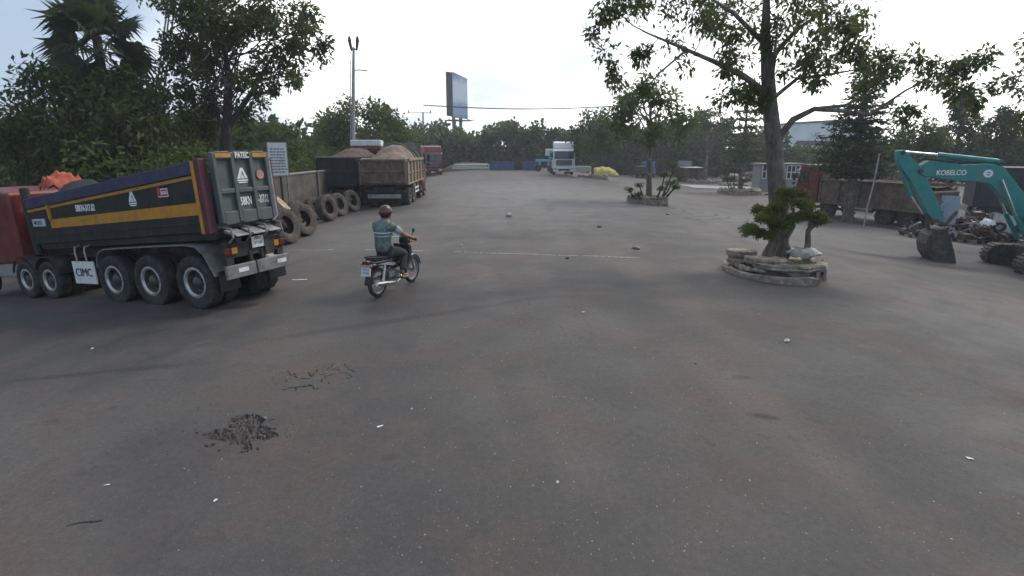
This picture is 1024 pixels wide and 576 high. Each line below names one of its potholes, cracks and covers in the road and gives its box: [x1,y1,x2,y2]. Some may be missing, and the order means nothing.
crack [265,363,354,391]
pothole [194,414,279,454]
